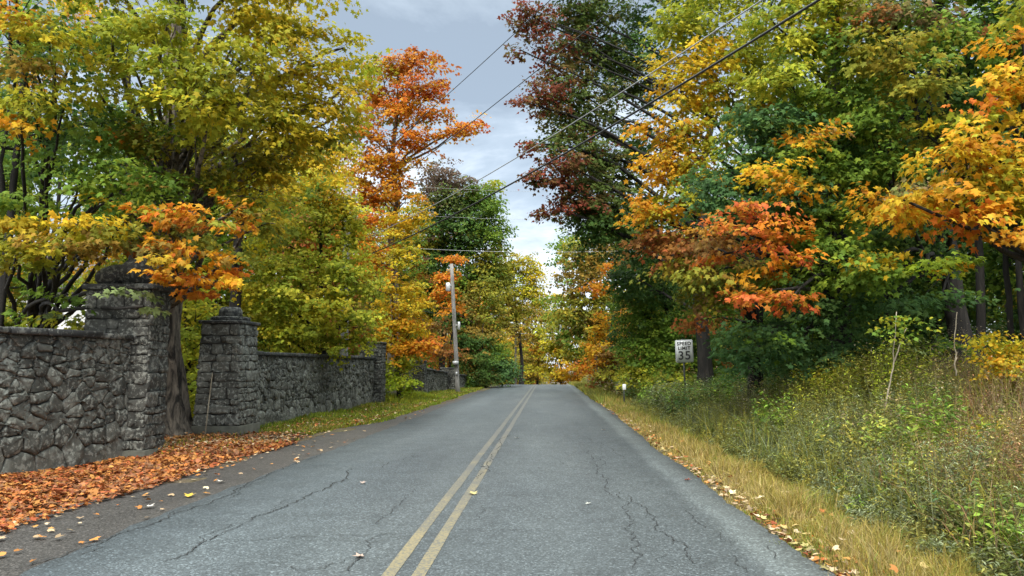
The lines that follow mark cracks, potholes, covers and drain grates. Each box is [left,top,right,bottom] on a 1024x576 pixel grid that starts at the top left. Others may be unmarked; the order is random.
crack [165,468,352,561]
crack [247,490,416,570]
crack [586,443,705,568]
